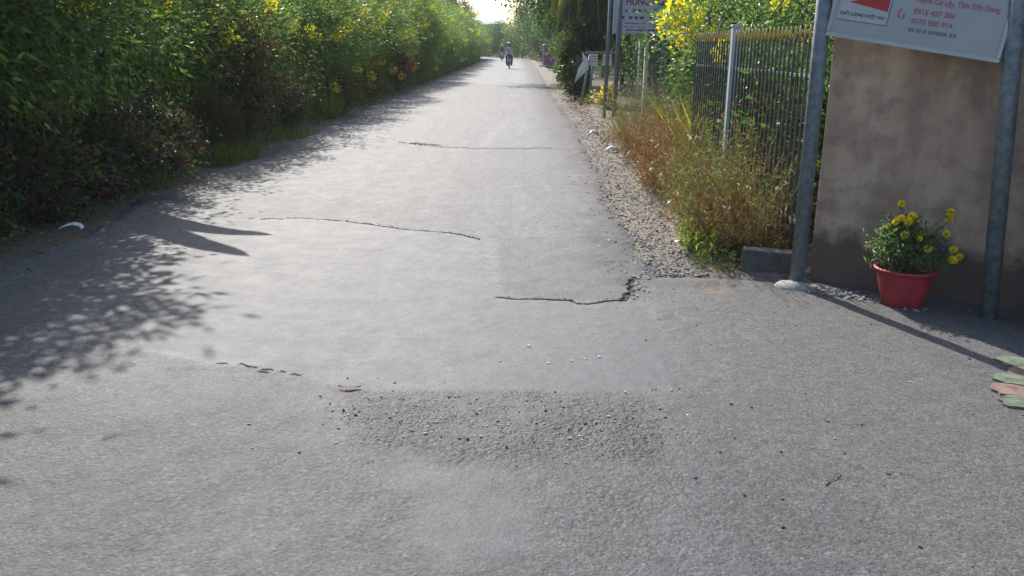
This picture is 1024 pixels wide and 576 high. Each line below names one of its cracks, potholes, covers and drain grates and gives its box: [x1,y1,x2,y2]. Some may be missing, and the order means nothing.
crack [217,363,302,376]
crack [286,218,480,240]
crack [497,276,679,305]
